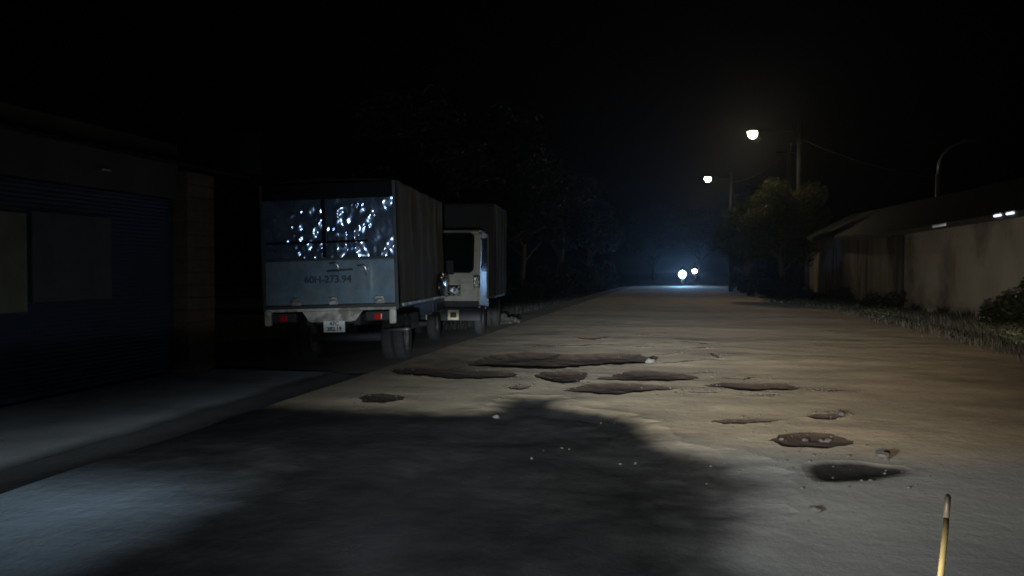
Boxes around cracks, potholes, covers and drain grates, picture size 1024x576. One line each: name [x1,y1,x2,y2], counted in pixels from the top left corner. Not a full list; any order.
pothole [534,371,589,384]
pothole [800,460,918,483]
pothole [468,352,653,369]
pothole [768,432,854,449]
pothole [704,382,800,391]
pothole [597,371,699,382]
pothole [387,368,518,379]
pothole [562,383,678,395]
